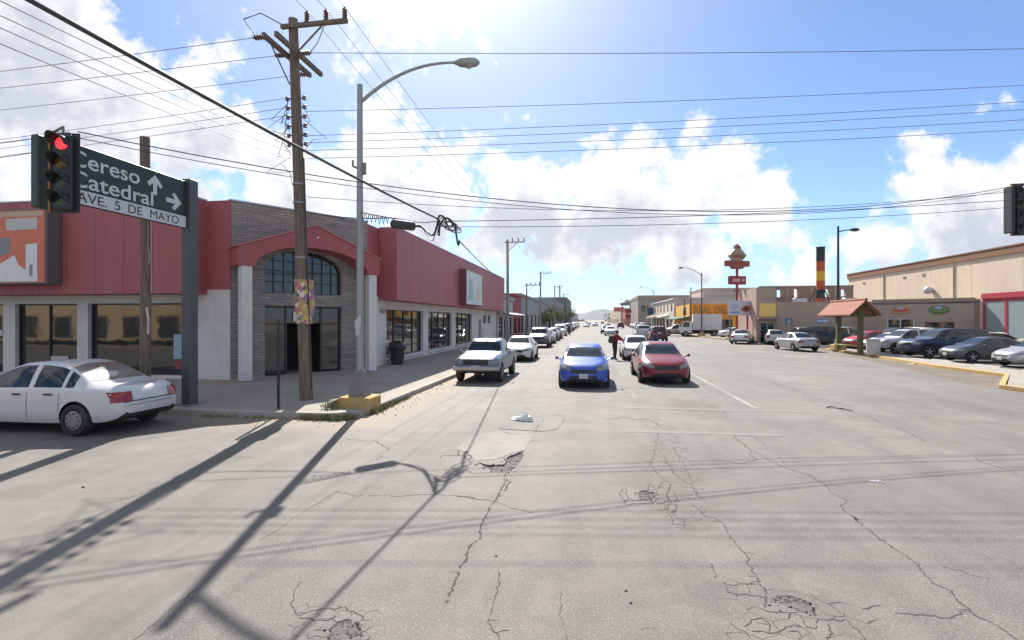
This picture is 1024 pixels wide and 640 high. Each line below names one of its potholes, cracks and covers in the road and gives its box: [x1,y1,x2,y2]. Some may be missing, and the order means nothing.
pothole [759,595,821,619]
pothole [634,491,658,502]
crack [262,474,529,640]
crack [618,426,1018,640]
pothole [304,619,369,640]
pothole [475,451,524,474]
